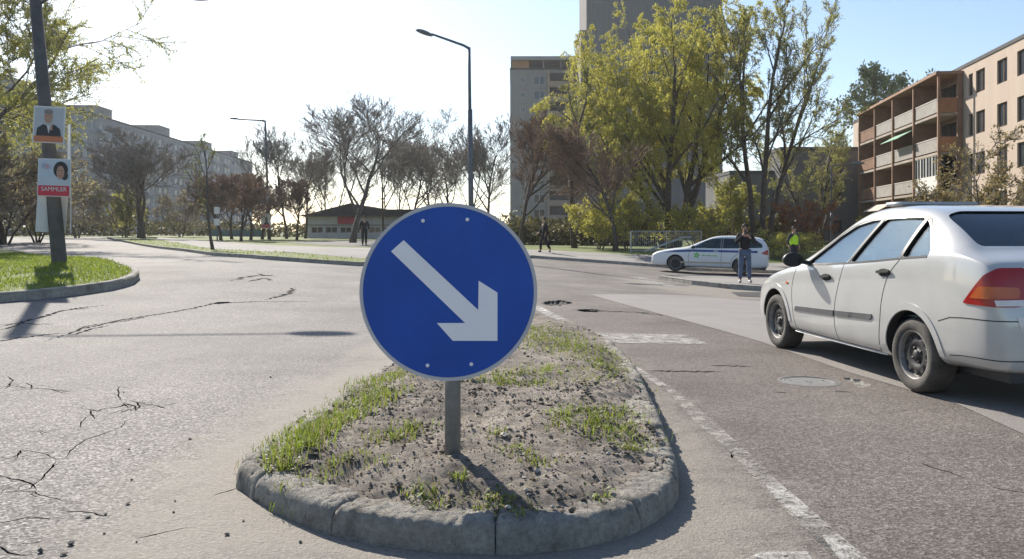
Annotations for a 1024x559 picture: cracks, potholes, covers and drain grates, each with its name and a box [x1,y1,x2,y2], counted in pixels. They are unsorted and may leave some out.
crack [0,540,45,556]
manhole cover [777,376,841,387]
crack [0,274,296,341]
crack [649,365,748,373]
crack [0,377,174,523]
